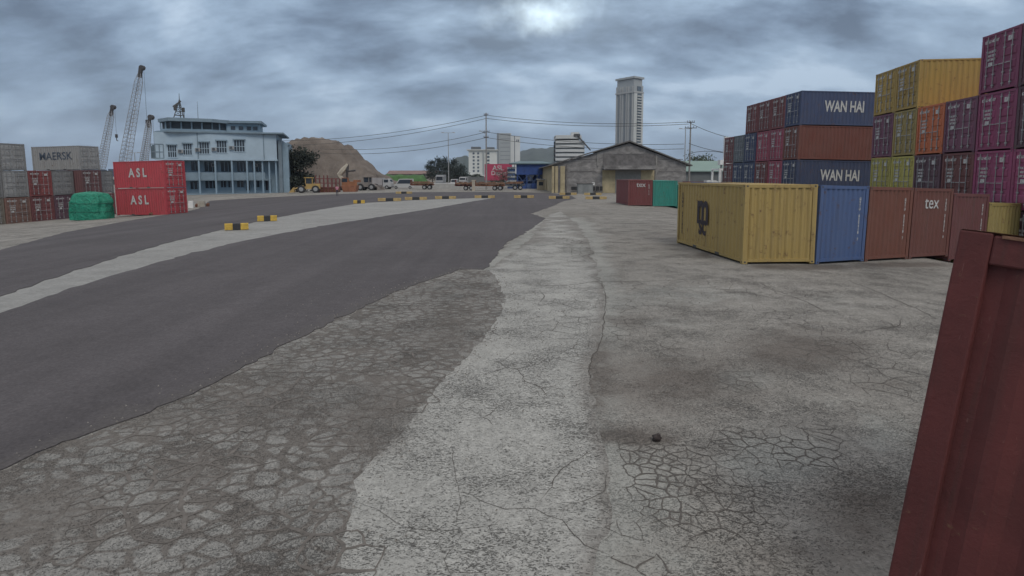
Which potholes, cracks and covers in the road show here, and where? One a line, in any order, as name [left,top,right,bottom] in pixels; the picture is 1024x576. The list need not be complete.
crack [456,237,842,425]
crack [46,271,921,576]
